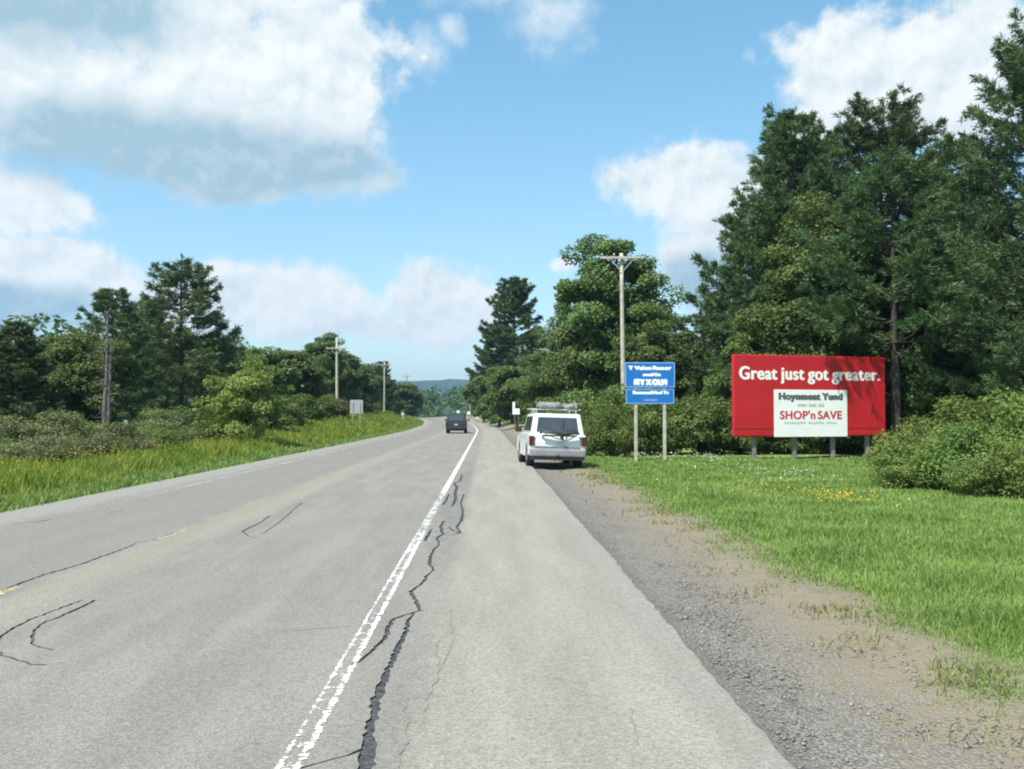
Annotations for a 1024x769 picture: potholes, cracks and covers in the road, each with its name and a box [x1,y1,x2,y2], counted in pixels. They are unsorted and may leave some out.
crack [292,475,464,769]
crack [1,531,176,591]
crack [242,503,302,539]
